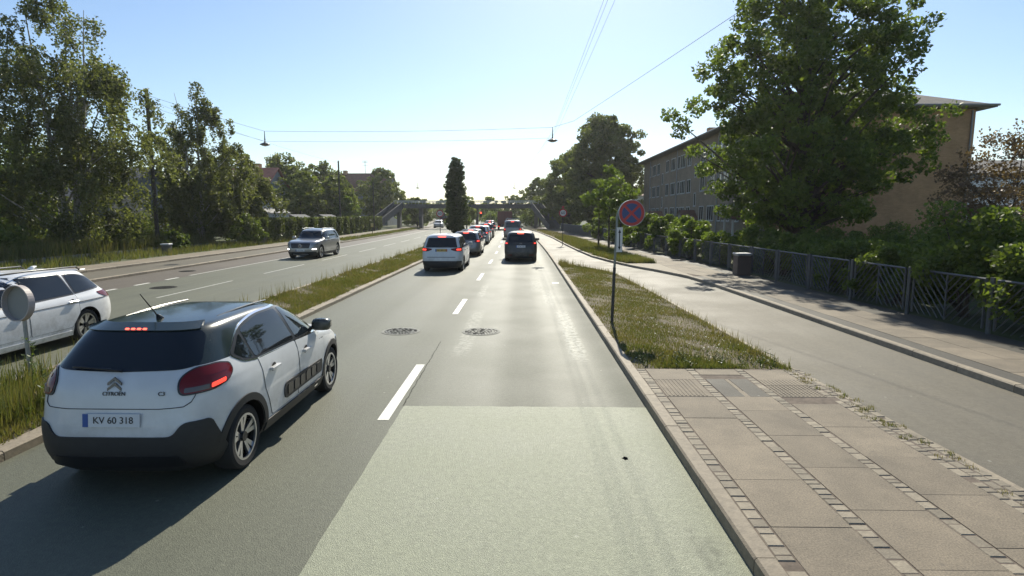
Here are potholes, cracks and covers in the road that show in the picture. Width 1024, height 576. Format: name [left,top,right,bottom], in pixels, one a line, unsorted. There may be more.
manhole cover [382,327,420,335]
